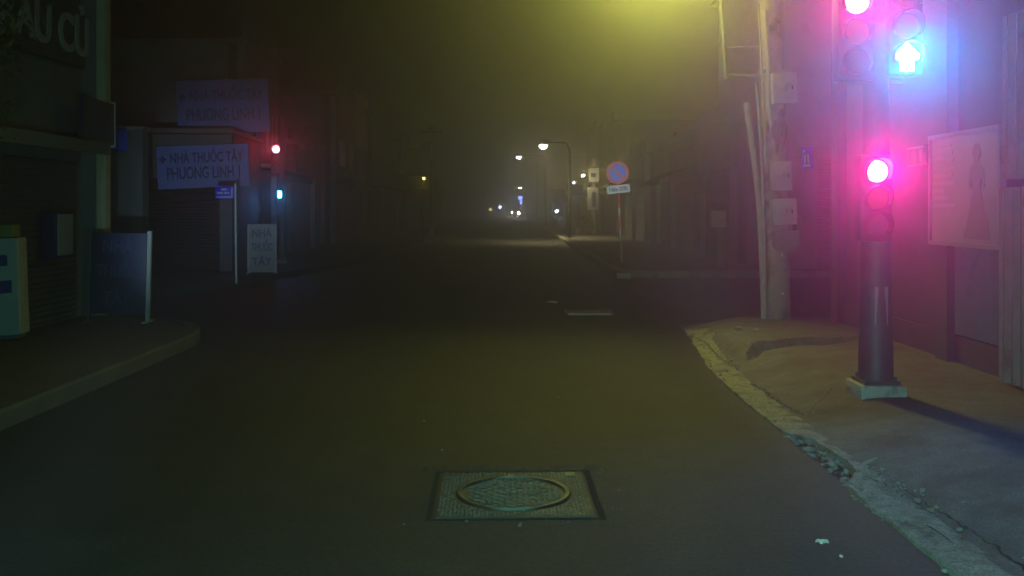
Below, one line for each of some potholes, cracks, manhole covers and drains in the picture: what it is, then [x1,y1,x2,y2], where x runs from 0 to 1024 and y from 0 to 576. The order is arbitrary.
manhole cover [402,464,623,528]
pothole [783,435,852,487]
crack [922,521,953,543]
